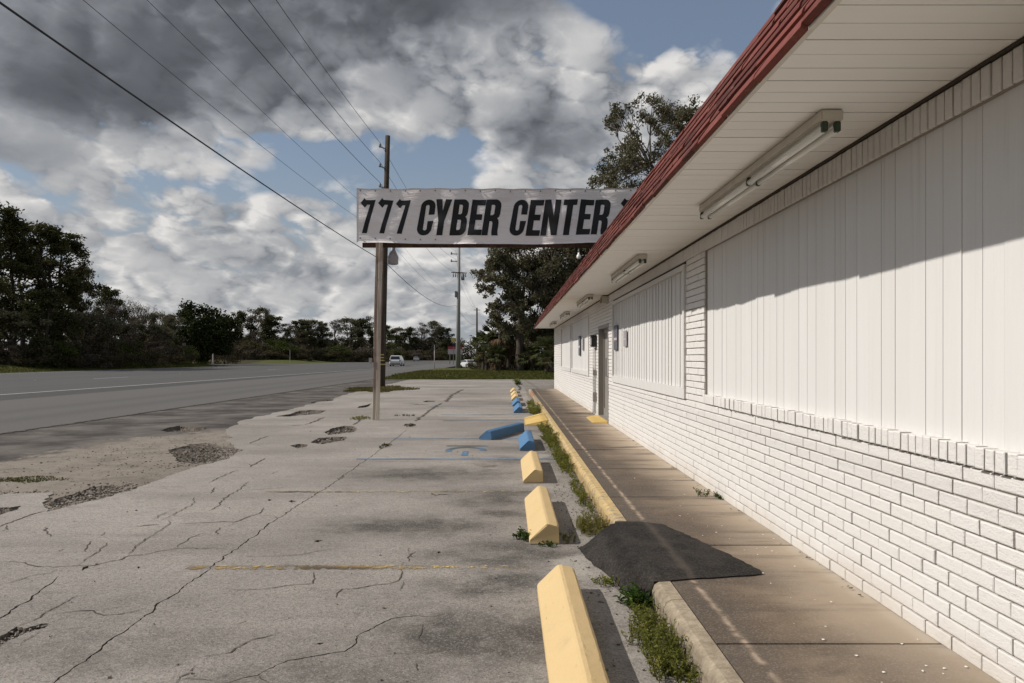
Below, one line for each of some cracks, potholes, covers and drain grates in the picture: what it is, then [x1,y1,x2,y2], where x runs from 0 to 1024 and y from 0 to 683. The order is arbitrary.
pothole [325,426,357,435]
crack [0,431,405,683]
pothole [48,485,124,507]
pothole [168,443,222,463]
pothole [0,623,49,646]
